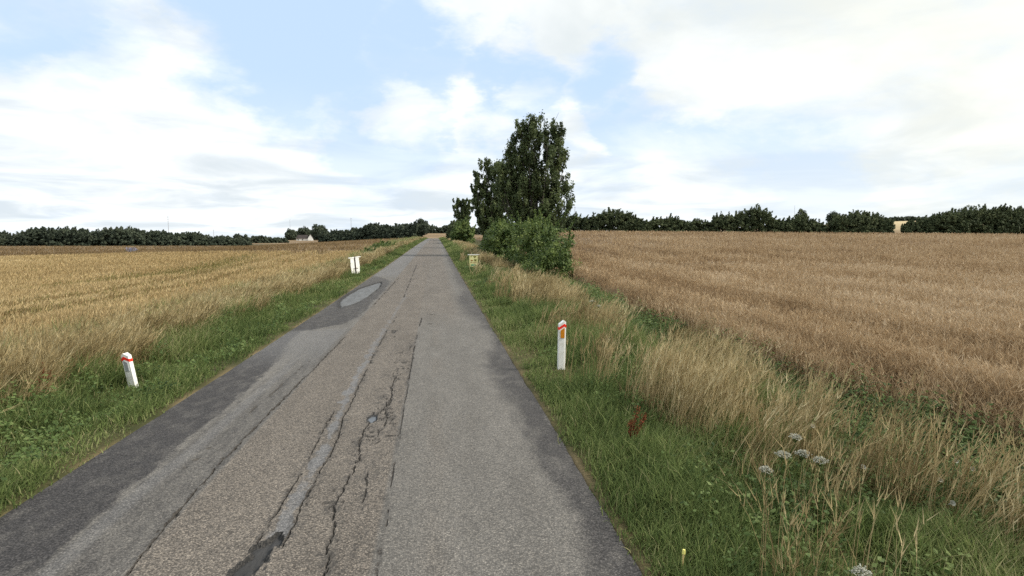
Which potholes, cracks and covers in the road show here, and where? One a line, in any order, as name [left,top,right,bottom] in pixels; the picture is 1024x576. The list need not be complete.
pothole [226,531,285,576]
crack [125,265,417,576]
